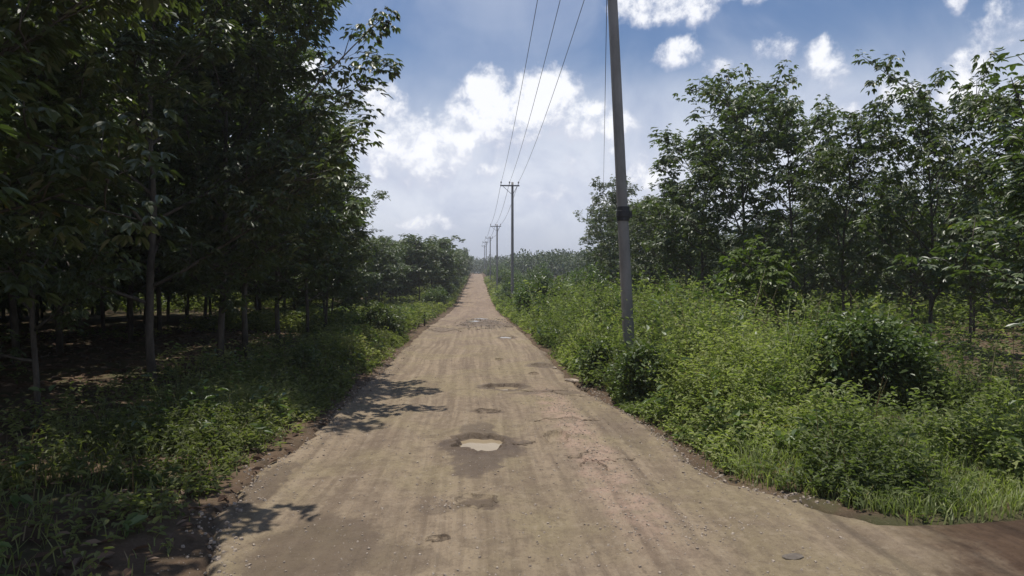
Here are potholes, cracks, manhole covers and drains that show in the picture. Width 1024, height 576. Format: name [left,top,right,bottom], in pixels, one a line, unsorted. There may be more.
pothole [441,432,513,454]
pothole [425,534,451,542]
pothole [476,383,532,392]
crack [565,451,636,470]
pothole [450,493,499,509]
